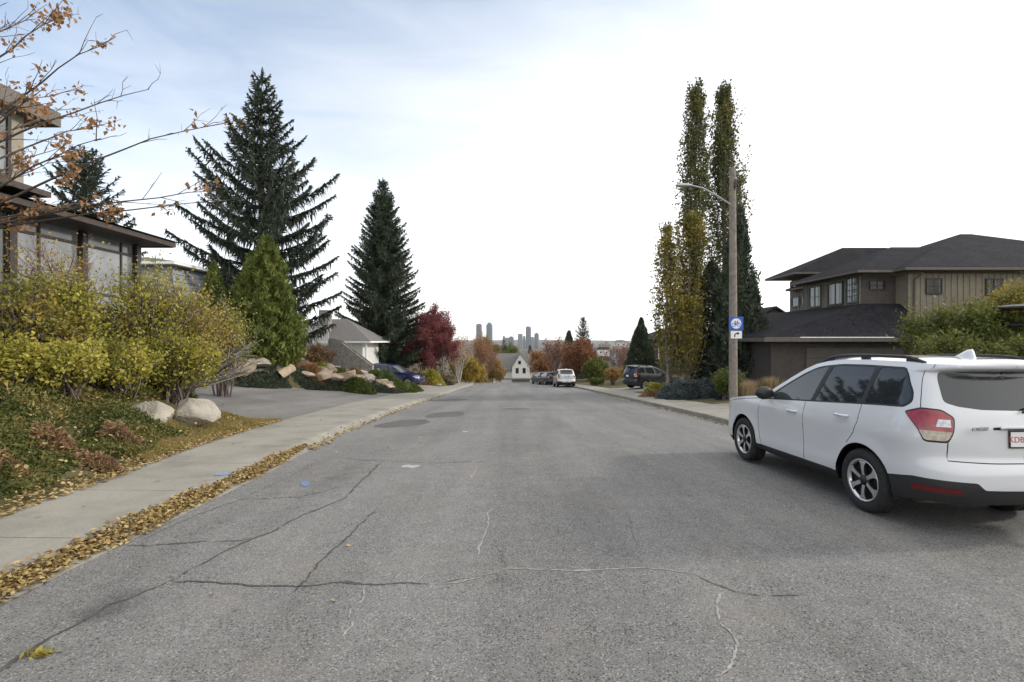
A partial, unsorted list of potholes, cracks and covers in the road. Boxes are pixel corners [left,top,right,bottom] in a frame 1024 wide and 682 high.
crack [0,458,803,679]
